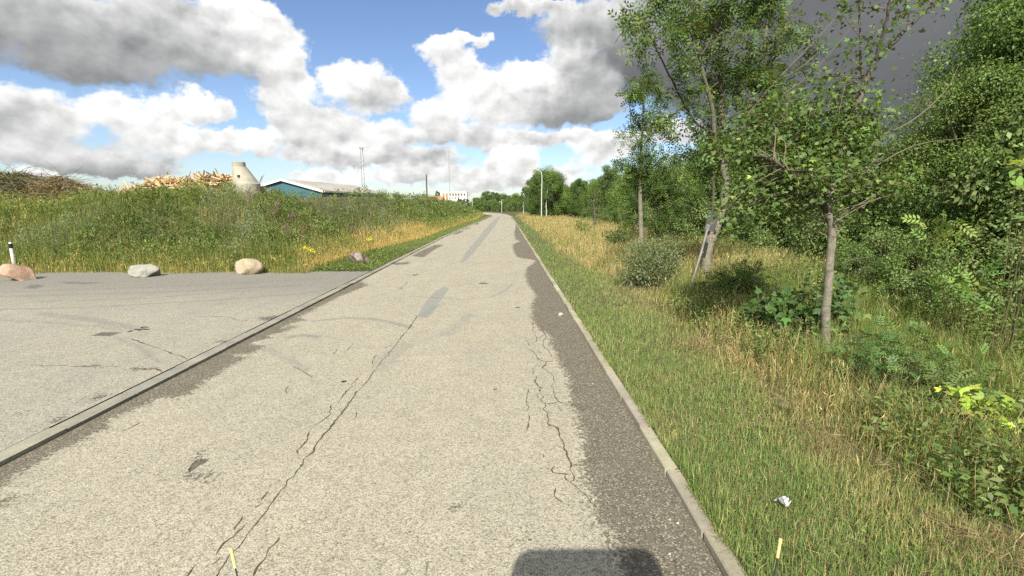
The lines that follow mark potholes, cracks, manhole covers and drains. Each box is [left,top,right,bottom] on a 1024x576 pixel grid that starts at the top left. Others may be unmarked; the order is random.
crack [40,339,188,372]
crack [253,537,279,576]
pothole [188,458,209,472]
crack [525,326,595,505]
